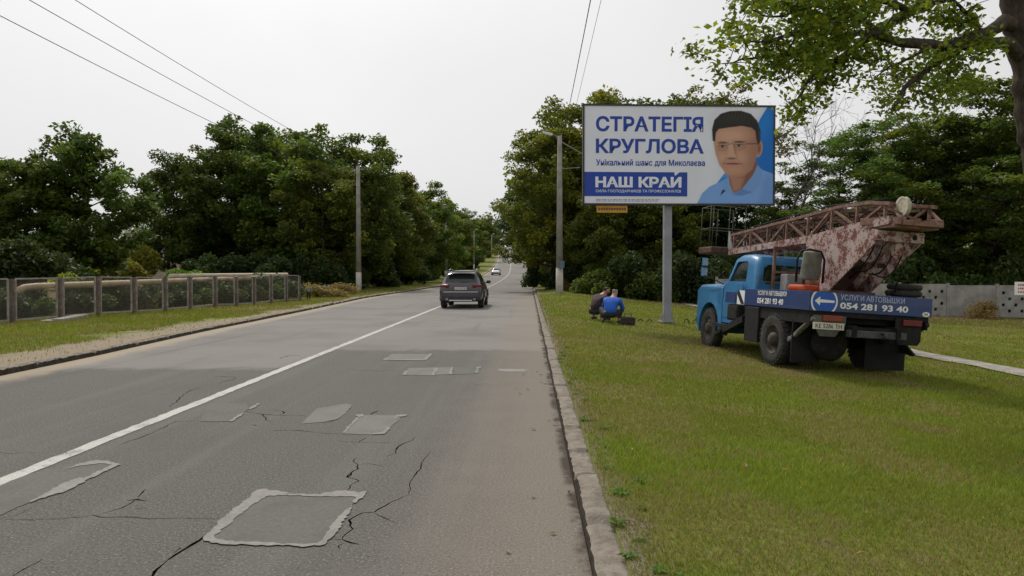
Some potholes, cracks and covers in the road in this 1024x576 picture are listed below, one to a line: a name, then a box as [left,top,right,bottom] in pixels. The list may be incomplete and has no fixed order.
crack [246,408,430,549]
crack [1,490,194,520]
crack [151,536,204,576]
